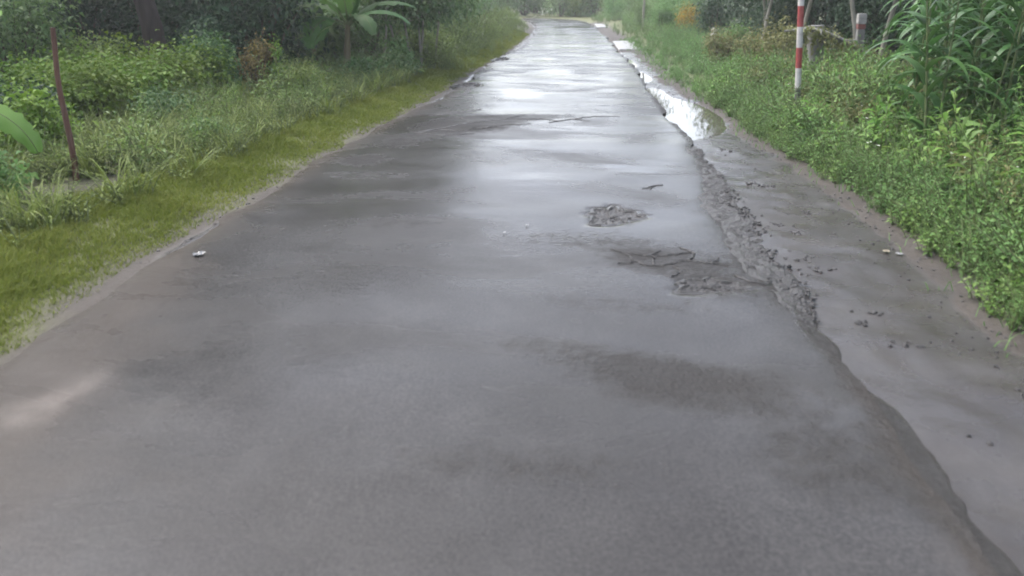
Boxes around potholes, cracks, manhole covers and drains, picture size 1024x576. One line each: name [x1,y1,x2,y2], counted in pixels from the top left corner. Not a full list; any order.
pothole [584,205,649,226]
pothole [673,276,758,295]
